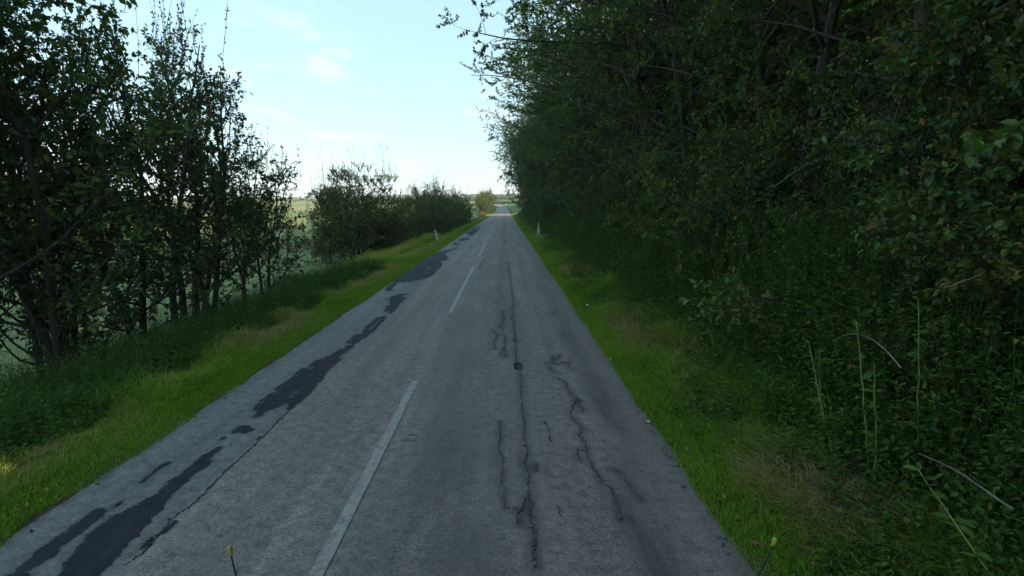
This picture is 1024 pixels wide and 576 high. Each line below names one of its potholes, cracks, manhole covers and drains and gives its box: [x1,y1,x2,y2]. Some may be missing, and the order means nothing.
crack [478,244,638,570]
